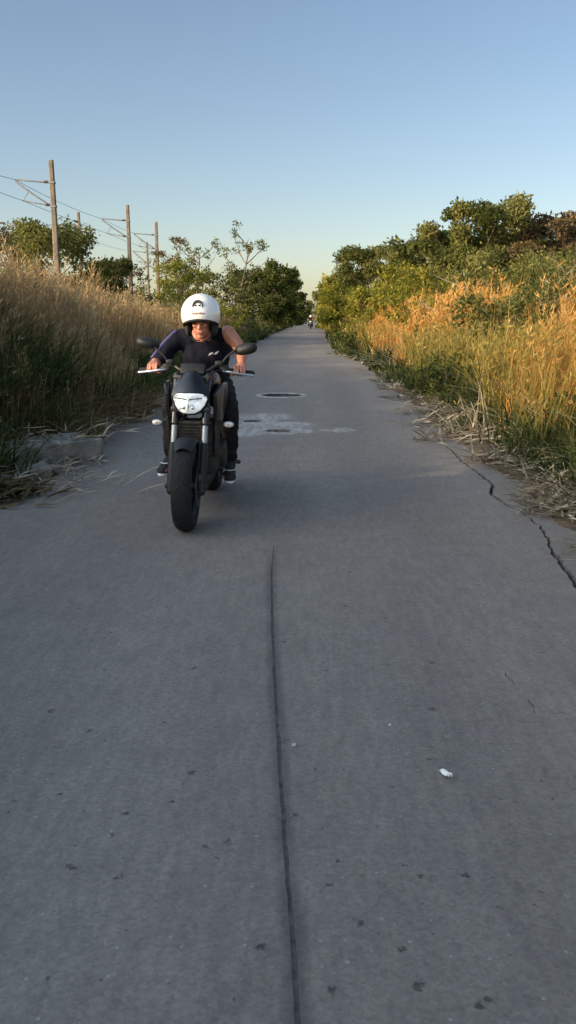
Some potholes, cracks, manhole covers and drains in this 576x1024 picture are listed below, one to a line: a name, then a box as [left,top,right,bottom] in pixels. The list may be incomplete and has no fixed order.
crack [414,411,576,588]
